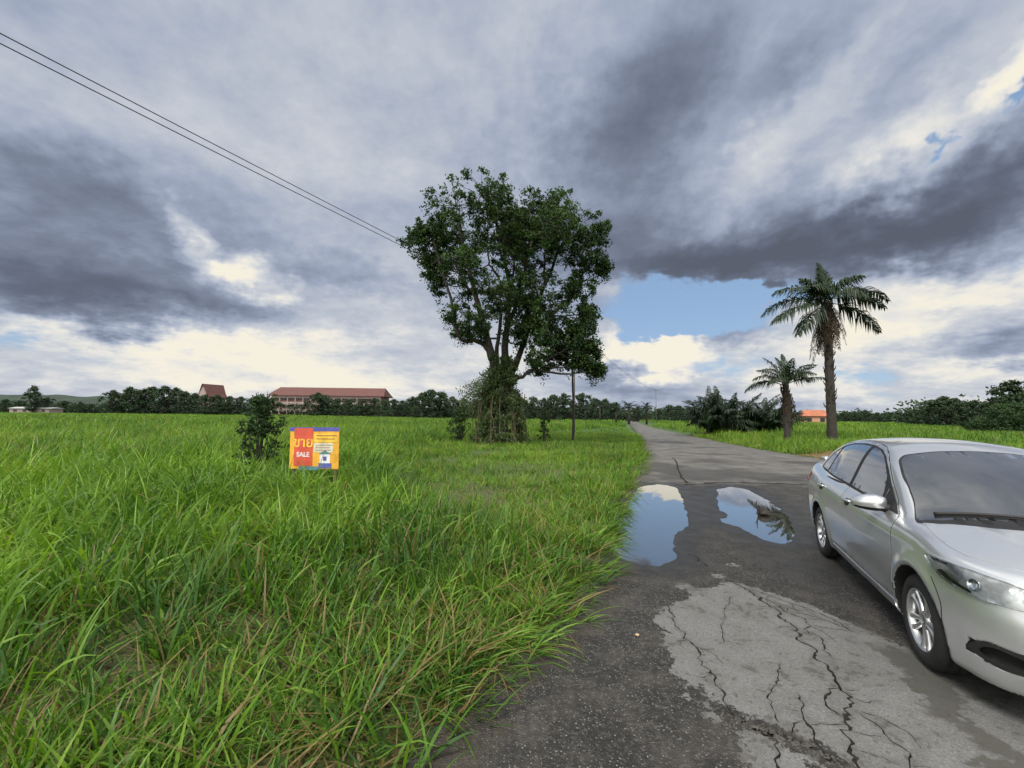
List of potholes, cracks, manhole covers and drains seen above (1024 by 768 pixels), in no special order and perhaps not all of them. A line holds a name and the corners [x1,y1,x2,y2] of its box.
pothole [716,486,796,544]
pothole [608,484,689,566]
crack [668,579,927,768]
crack [673,458,807,485]
